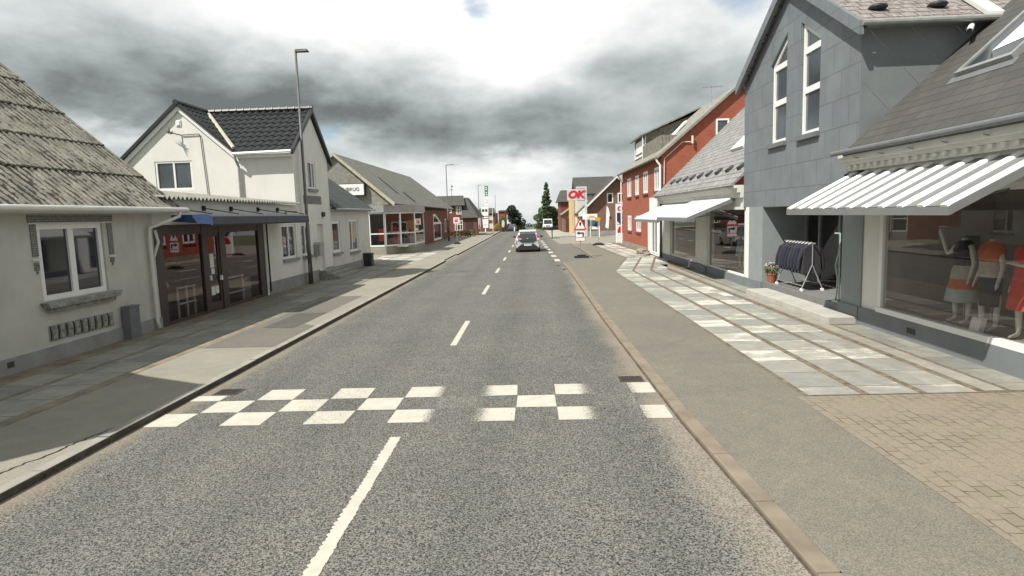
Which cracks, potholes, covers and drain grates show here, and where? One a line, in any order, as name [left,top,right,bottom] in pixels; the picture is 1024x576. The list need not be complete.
crack [0,428,111,474]
